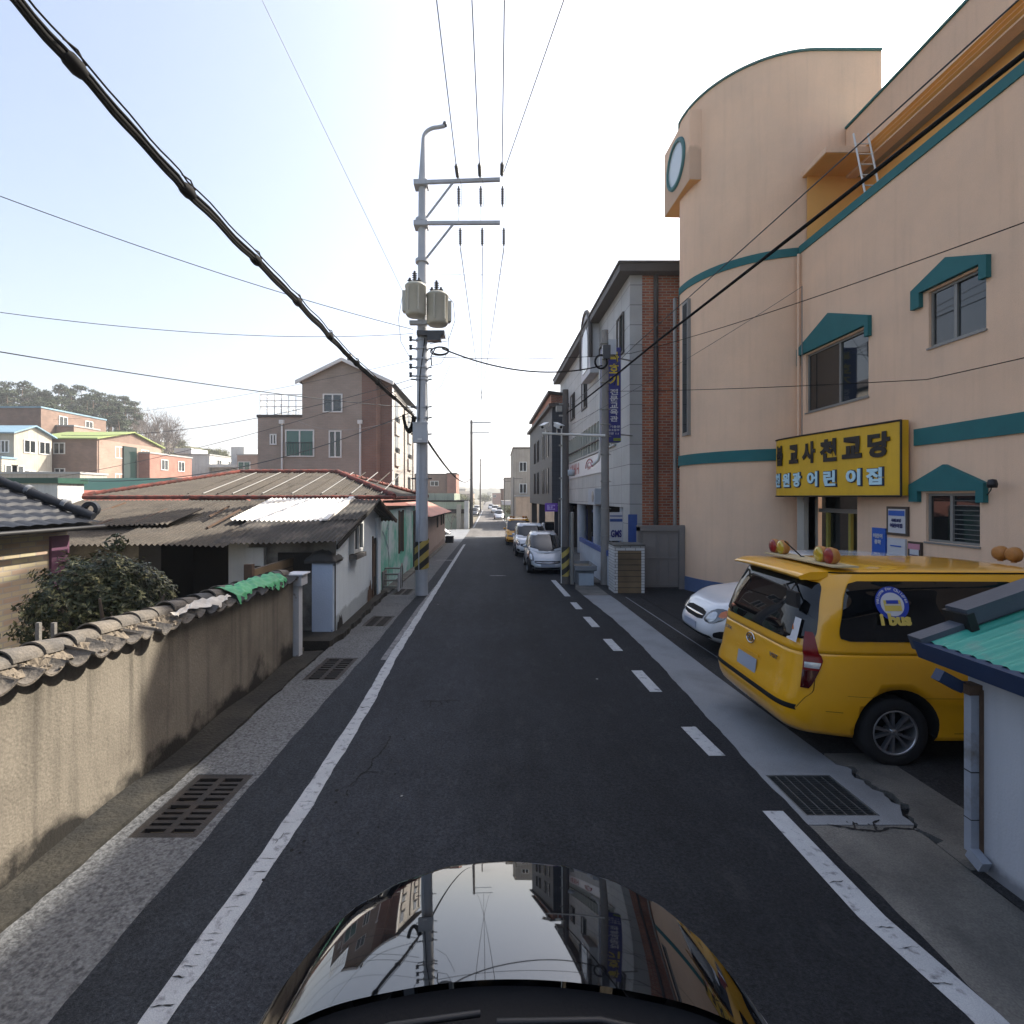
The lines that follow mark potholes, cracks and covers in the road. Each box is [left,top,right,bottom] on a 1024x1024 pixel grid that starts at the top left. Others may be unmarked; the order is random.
crack [828,820,912,832]
drain grate [767,776,879,816]
crack [255,718,406,881]
drain grate [128,775,253,838]
drain grate [362,616,395,626]
drain grate [303,658,358,680]
